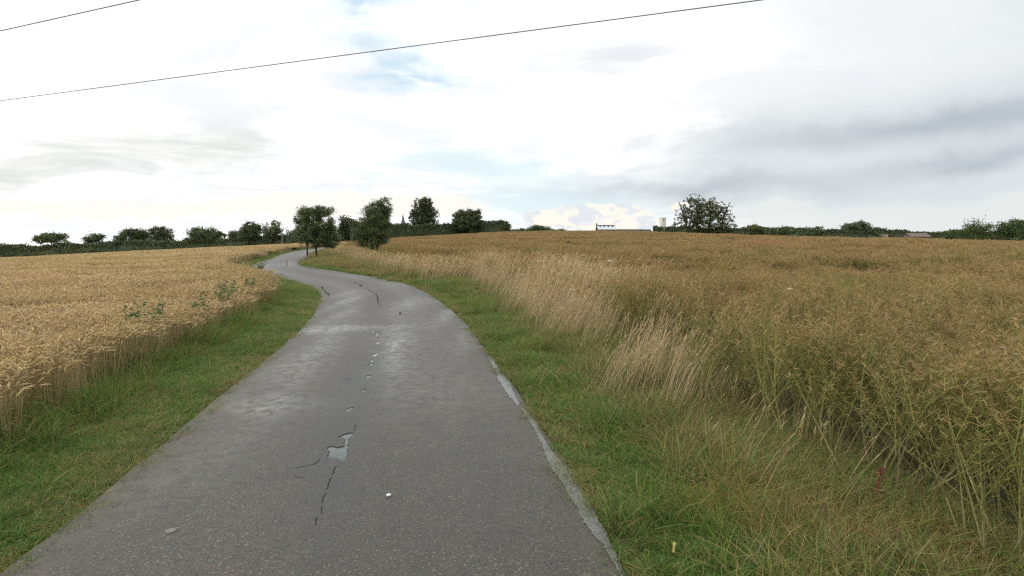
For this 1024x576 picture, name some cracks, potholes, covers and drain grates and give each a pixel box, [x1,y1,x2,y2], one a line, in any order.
crack [290,459,337,537]
pothole [327,432,354,461]
